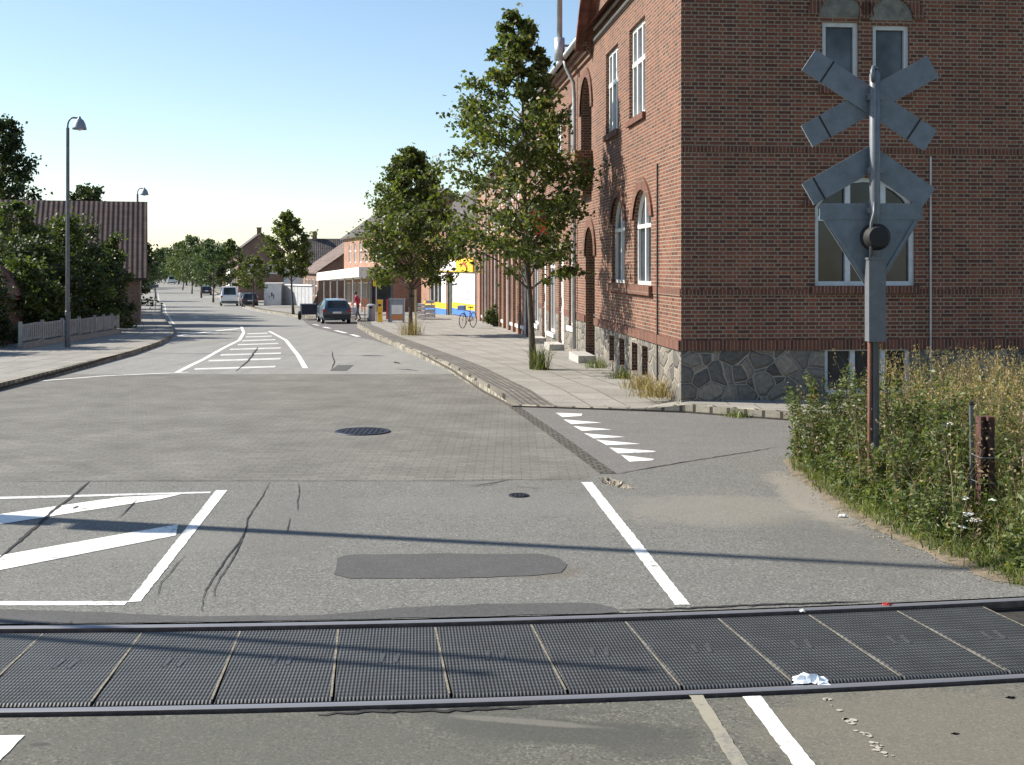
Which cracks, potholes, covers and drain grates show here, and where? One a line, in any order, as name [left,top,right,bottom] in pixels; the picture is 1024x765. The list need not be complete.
crack [0,482,89,557]
crack [157,482,270,609]
pothole [599,477,634,489]
manhole cover [335,427,391,435]
